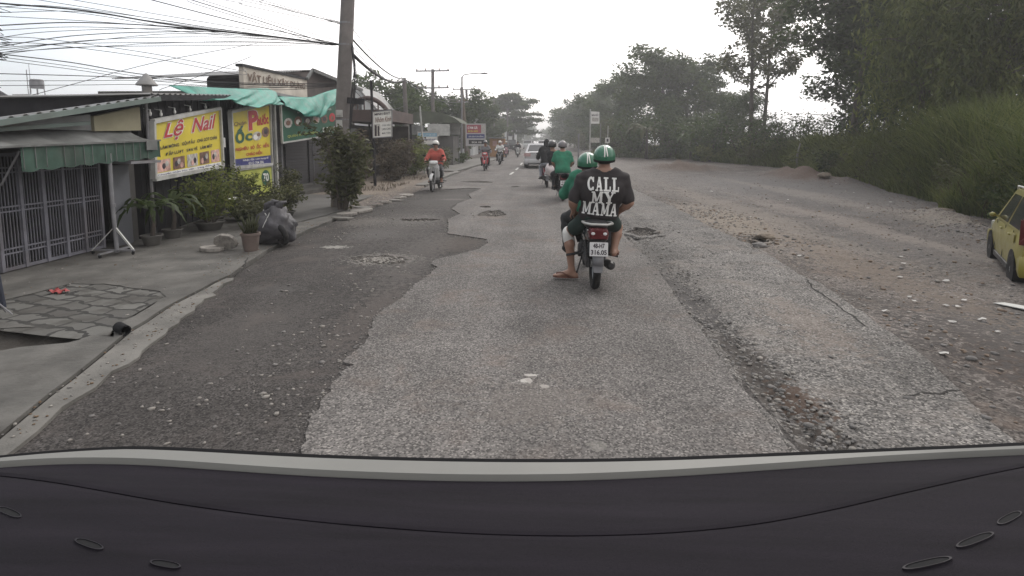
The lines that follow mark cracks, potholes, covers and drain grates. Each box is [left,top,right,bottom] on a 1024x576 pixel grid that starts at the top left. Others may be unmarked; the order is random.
pothole [349,255,409,264]
crack [806,279,866,326]
pothole [622,227,666,240]
